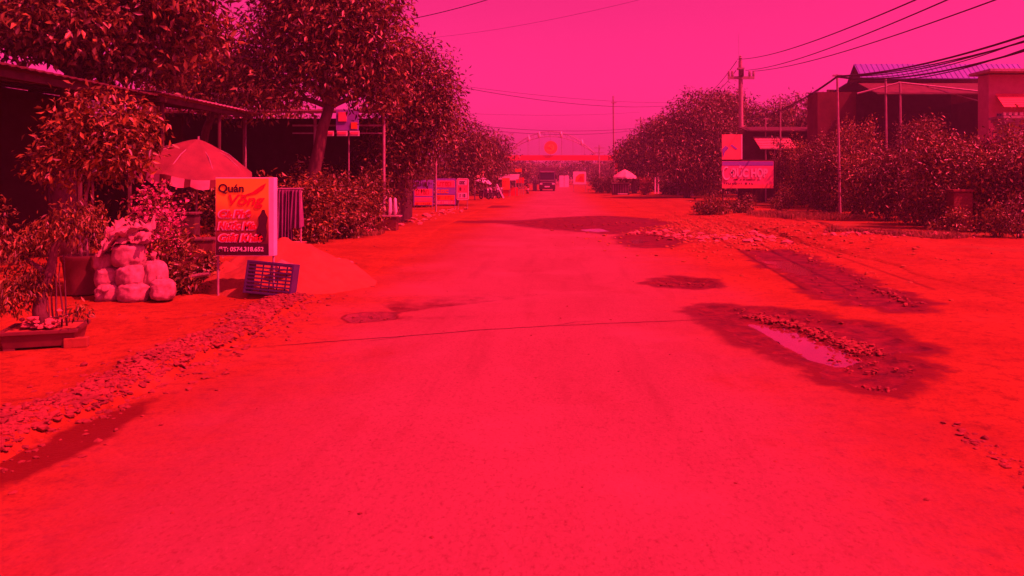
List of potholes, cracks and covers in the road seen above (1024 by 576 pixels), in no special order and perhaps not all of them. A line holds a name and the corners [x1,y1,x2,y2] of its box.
pothole [644,276,718,289]
pothole [344,312,399,323]
pothole [693,305,933,394]
